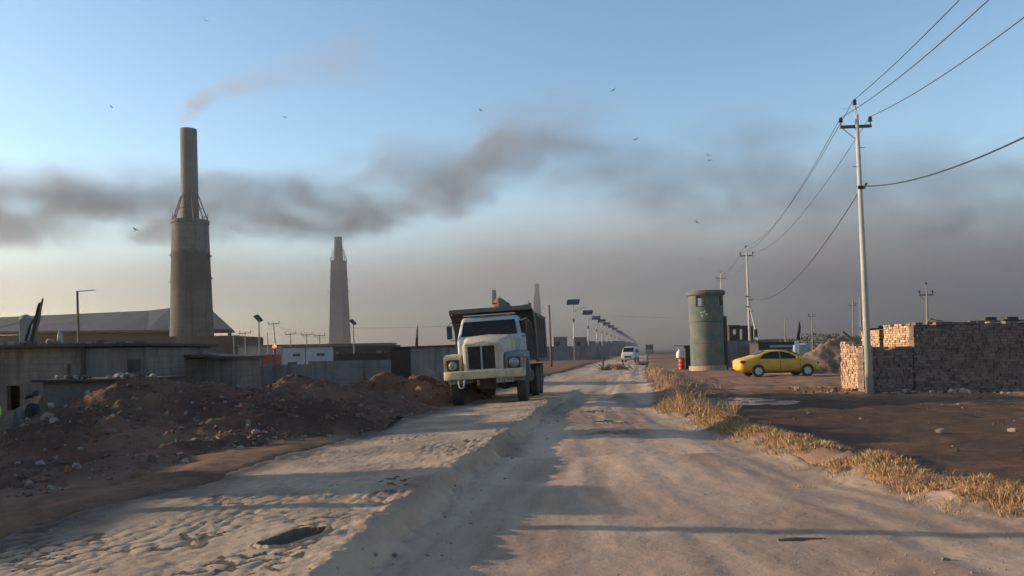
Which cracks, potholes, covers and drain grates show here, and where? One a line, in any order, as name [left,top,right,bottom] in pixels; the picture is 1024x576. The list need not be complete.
pothole [253,526,332,549]
